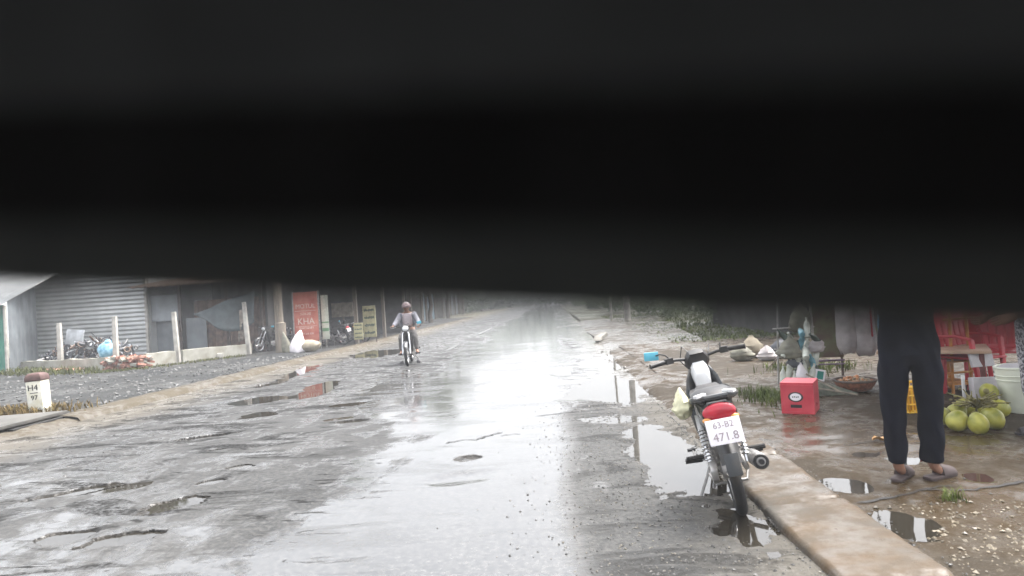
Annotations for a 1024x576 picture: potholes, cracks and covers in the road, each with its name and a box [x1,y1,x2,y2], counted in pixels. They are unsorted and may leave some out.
pothole [184,476,236,487]
pothole [215,462,263,471]
pothole [449,453,487,463]
pothole [118,490,224,519]
pothole [0,476,157,505]
pothole [49,526,183,557]
pothole [153,430,250,443]
